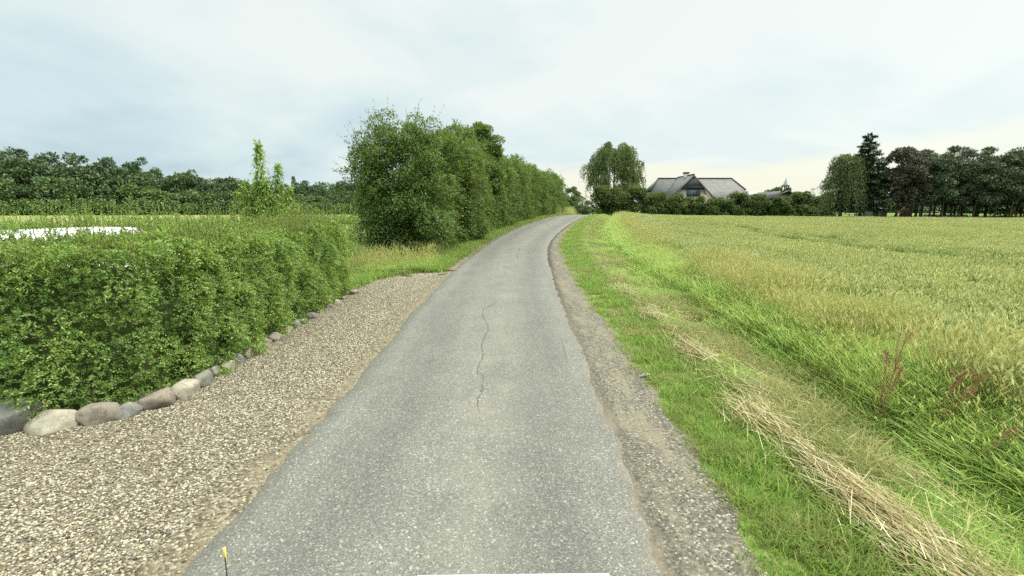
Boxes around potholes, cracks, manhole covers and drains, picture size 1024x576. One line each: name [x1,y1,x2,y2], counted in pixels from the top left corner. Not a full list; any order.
crack [477,301,498,407]
